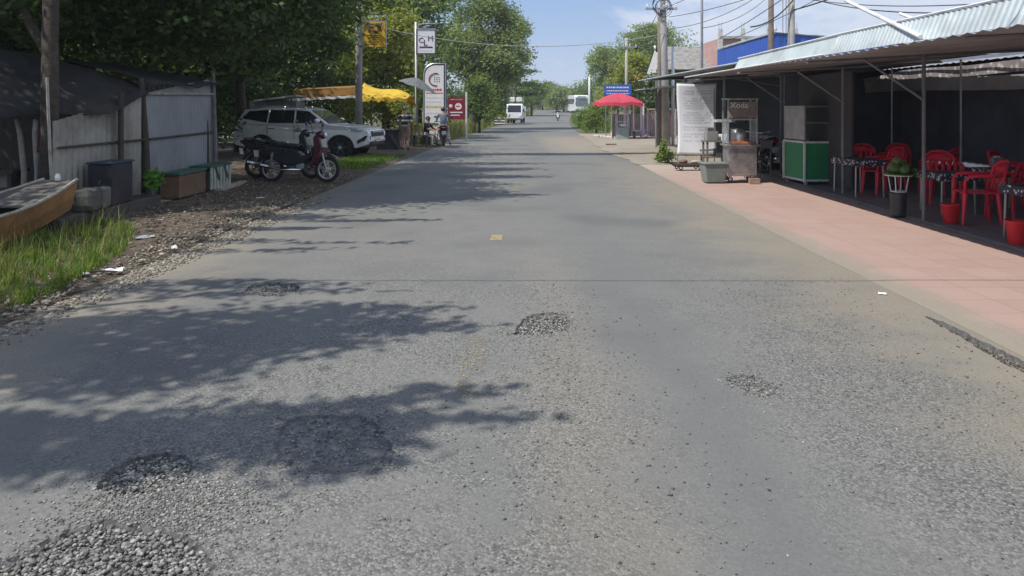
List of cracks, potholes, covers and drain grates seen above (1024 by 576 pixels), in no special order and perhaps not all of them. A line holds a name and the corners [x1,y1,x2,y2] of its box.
pothole [241,282,304,296]
pothole [96,452,194,498]
pothole [512,312,571,335]
crack [926,316,1024,373]
pothole [0,519,217,576]
pothole [725,374,779,399]
